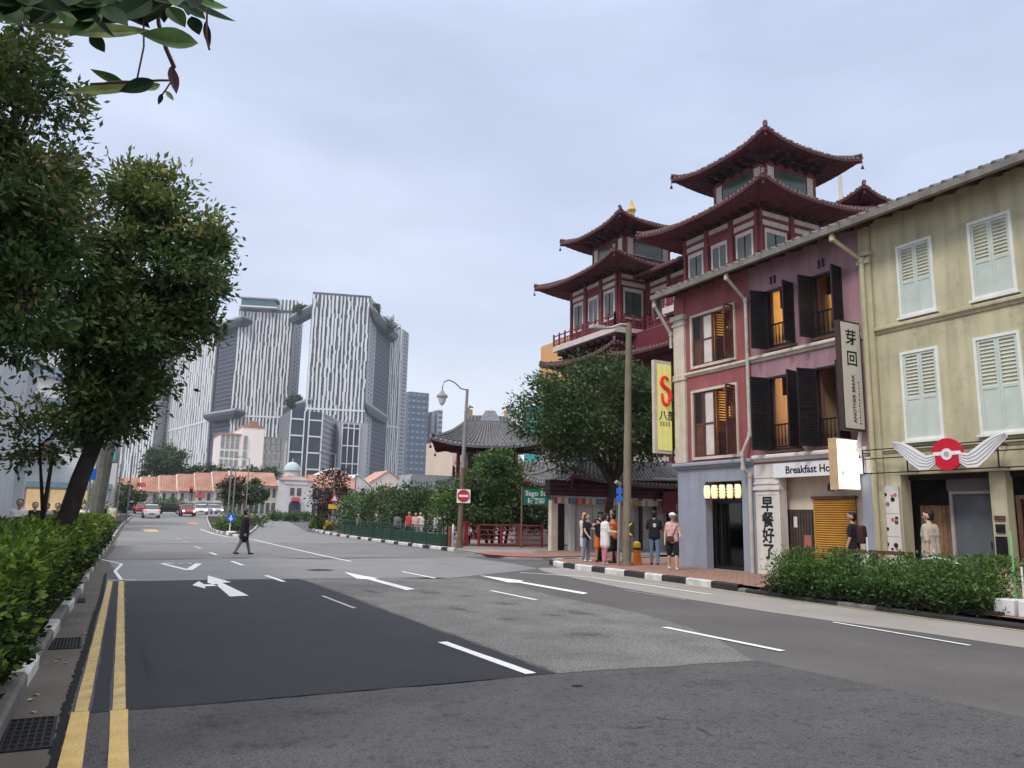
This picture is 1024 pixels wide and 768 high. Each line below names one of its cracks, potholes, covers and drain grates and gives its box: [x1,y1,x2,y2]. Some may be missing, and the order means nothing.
drain grate [0,715,58,754]
drain grate [48,637,82,650]
